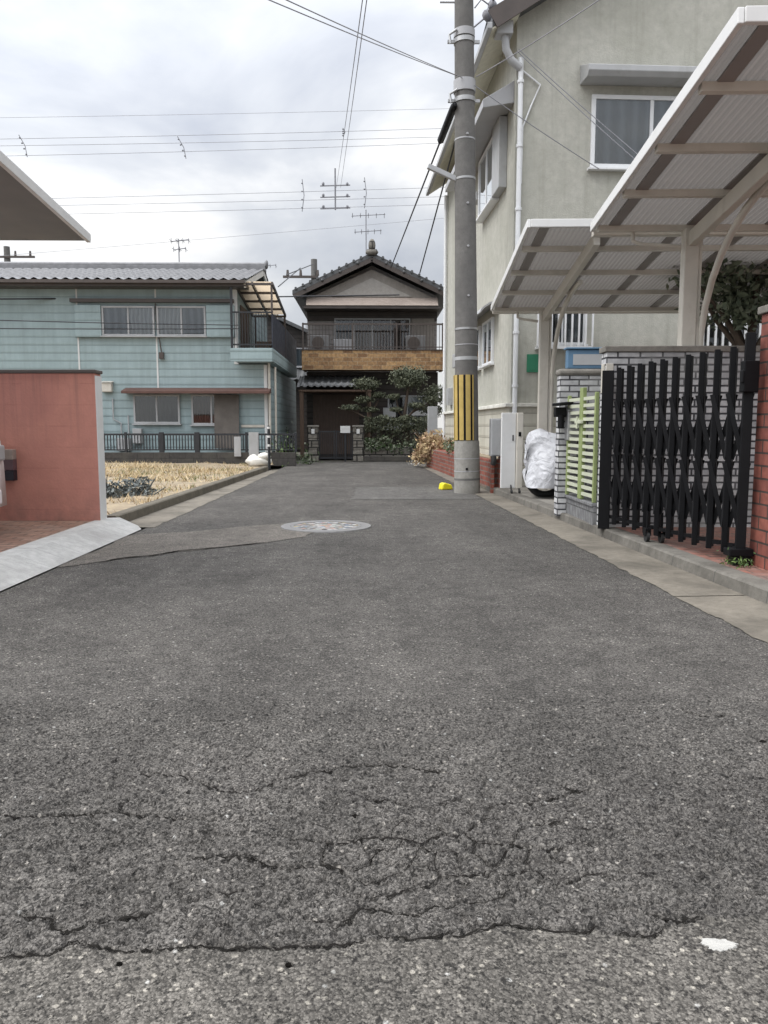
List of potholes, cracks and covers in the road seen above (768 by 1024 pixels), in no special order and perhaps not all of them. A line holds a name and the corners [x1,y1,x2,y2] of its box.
crack [145,765,447,794]
crack [442,787,590,808]
manhole cover [281,520,371,533]
crack [0,798,700,959]
